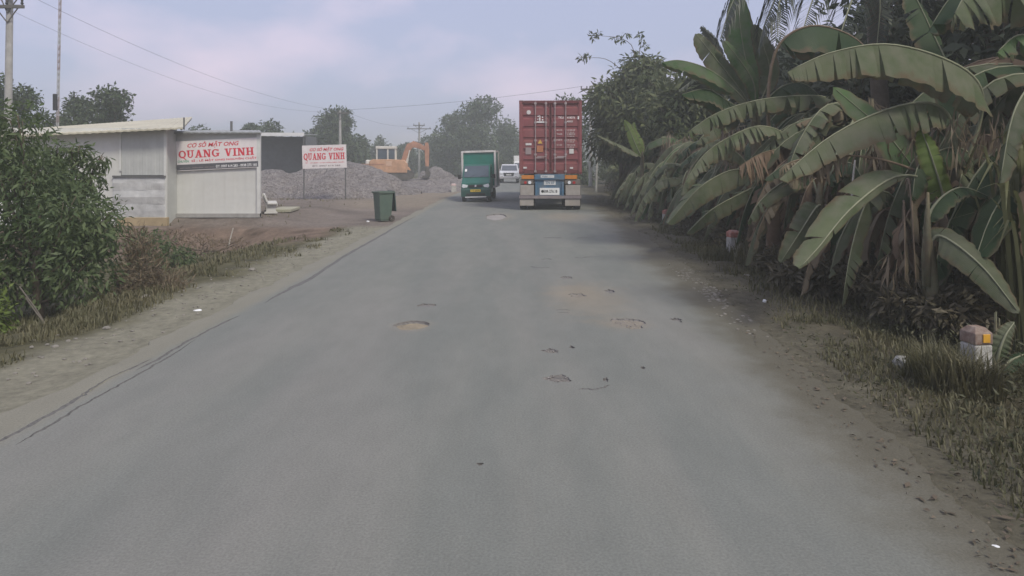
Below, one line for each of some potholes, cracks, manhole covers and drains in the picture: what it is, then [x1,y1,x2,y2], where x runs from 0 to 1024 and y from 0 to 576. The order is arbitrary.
pothole [542,374,572,382]
pothole [393,321,429,330]
pothole [610,318,646,329]
